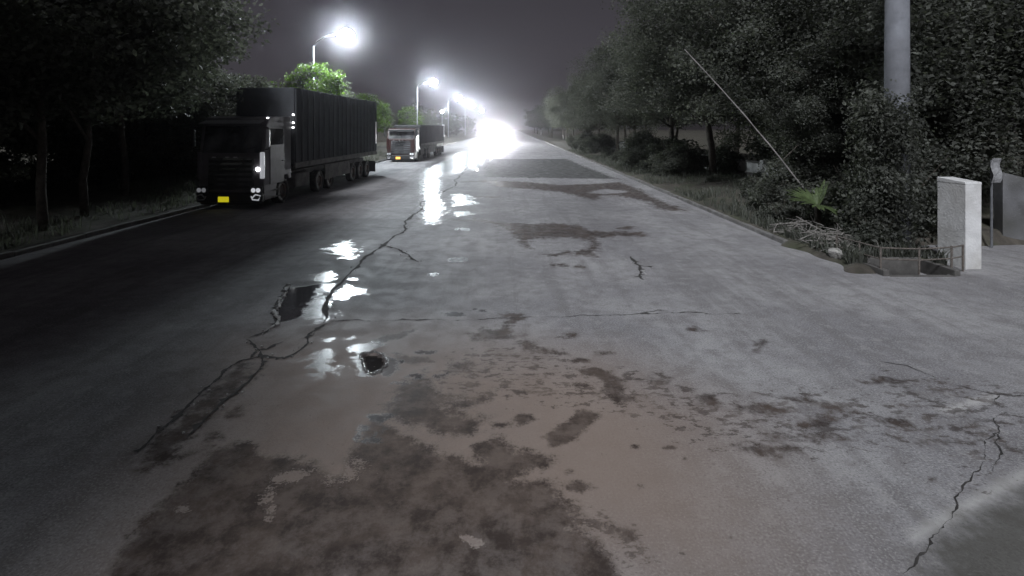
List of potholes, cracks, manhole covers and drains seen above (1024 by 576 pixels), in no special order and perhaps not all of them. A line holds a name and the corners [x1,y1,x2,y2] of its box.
crack [134,283,739,452]
pothole [359,351,388,375]
crack [880,361,1024,573]
crack [626,256,652,280]
